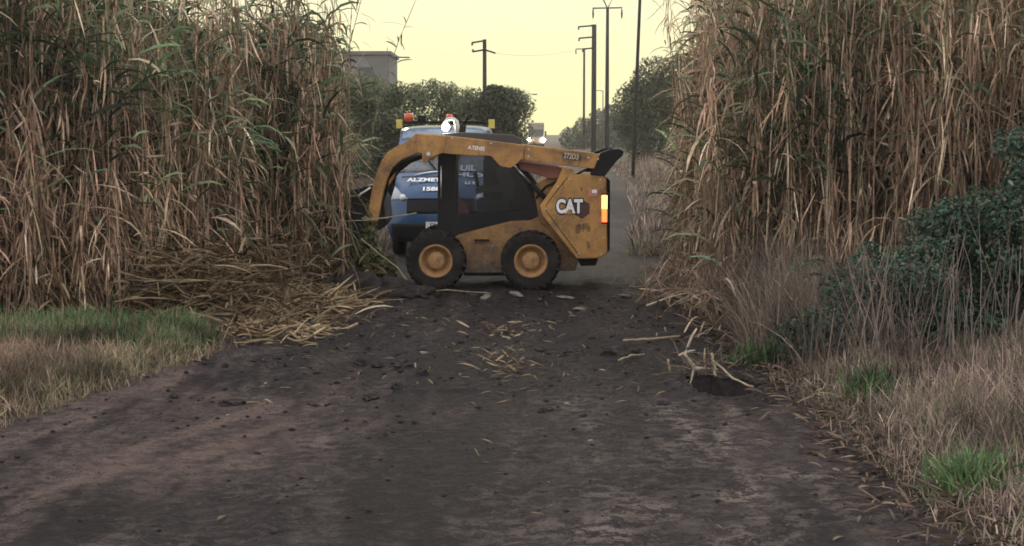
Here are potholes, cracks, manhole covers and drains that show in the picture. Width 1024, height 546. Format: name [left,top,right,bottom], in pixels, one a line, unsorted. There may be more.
pothole [676,373,769,400]
